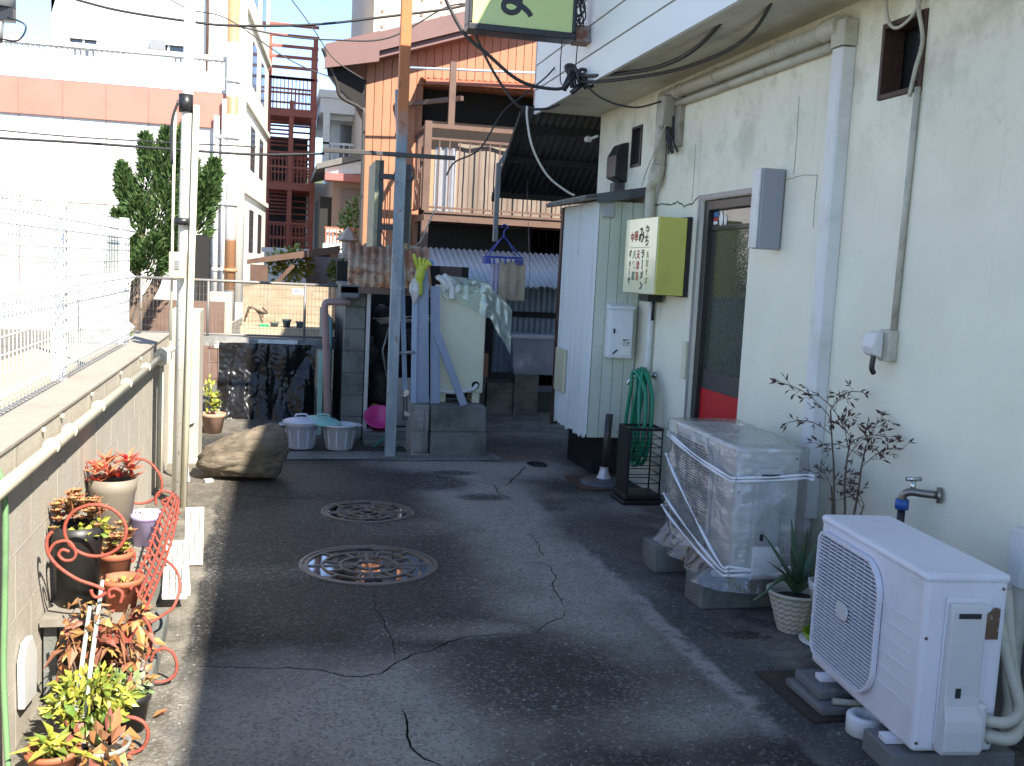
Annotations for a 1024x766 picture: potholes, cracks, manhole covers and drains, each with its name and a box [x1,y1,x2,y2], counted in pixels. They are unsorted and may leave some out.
manhole cover [321,500,413,523]
crack [413,468,524,500]
manhole cover [298,545,438,586]
crack [199,533,587,677]
crack [402,709,442,766]
